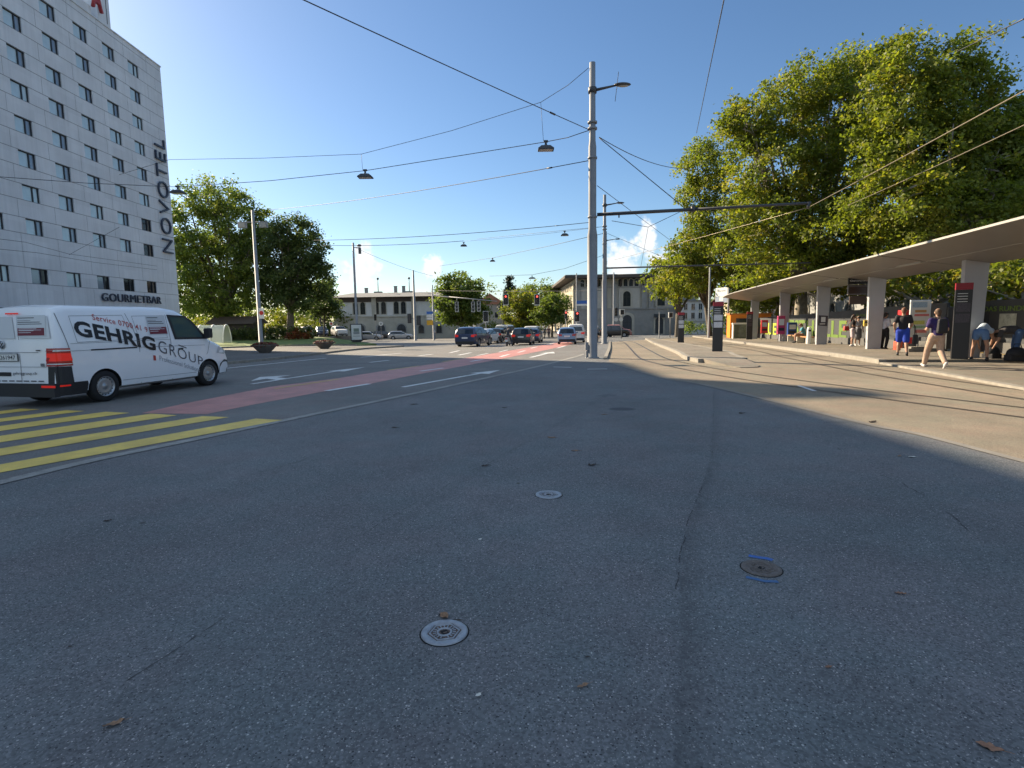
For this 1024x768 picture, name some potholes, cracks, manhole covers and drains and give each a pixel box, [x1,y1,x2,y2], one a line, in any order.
manhole cover [535,490,563,499]
manhole cover [419,619,469,647]
manhole cover [740,560,784,578]
